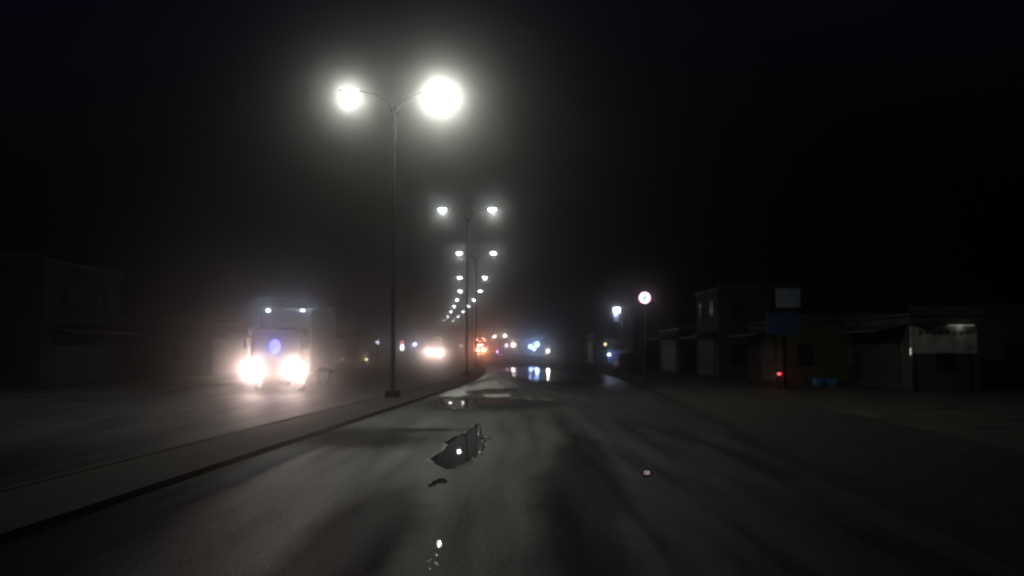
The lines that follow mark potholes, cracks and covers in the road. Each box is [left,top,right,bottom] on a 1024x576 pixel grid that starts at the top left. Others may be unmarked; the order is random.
pothole [436,396,555,410]
pothole [426,478,450,488]
pothole [426,424,491,470]
